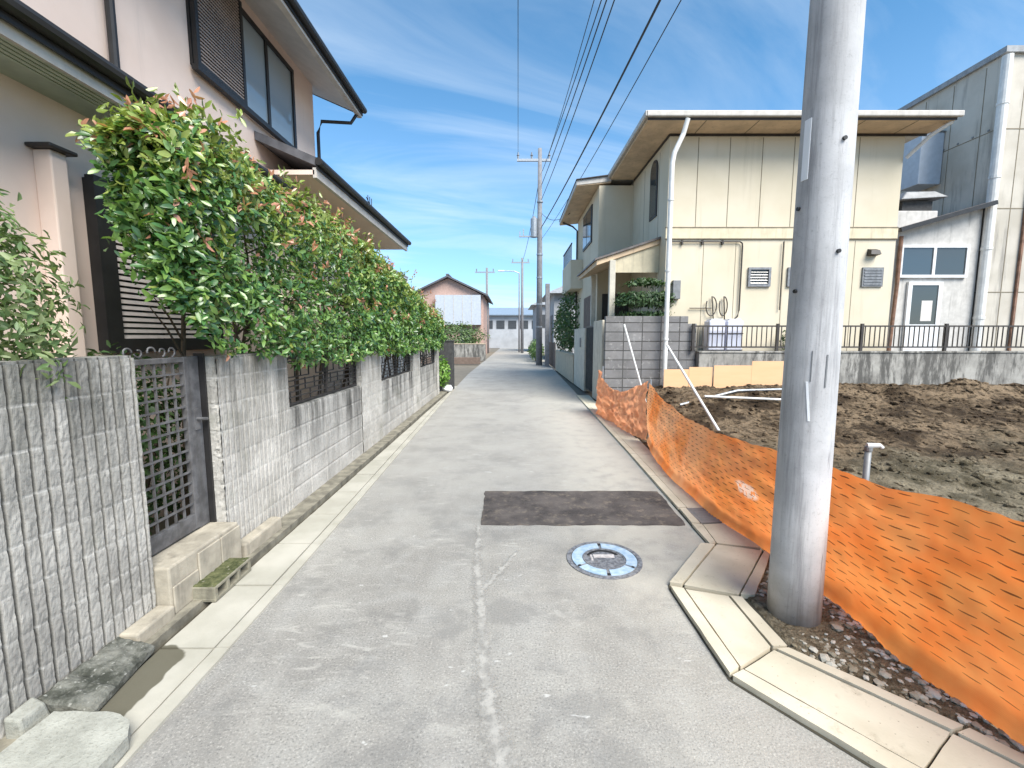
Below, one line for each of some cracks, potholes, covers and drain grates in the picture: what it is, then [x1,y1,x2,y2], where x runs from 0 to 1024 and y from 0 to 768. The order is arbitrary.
crack [472,525,520,768]
manhole cover [567,541,643,580]
